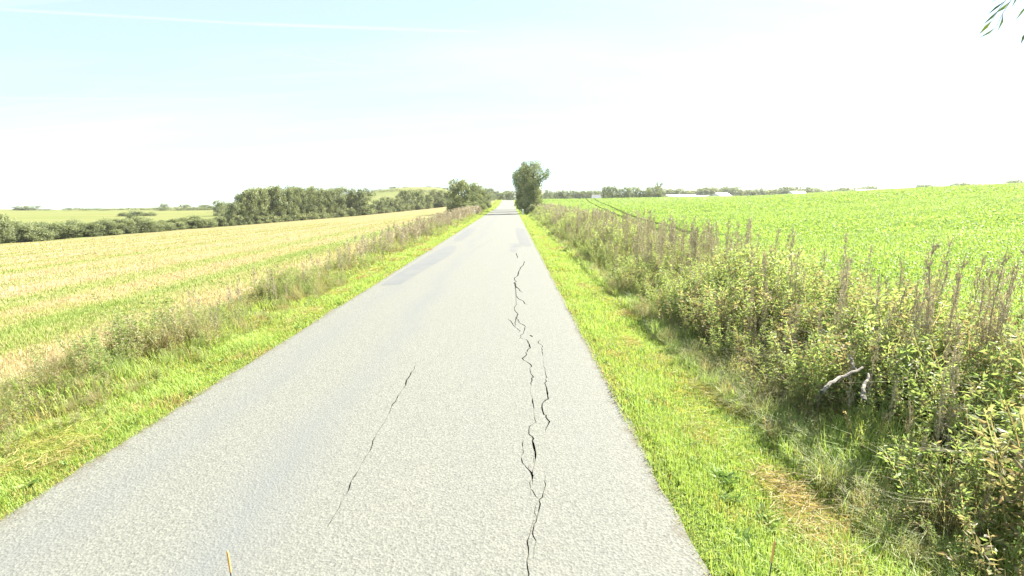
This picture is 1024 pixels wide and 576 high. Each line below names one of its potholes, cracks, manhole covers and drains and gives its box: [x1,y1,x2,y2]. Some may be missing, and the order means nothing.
crack [325,362,416,531]
crack [508,253,550,576]
